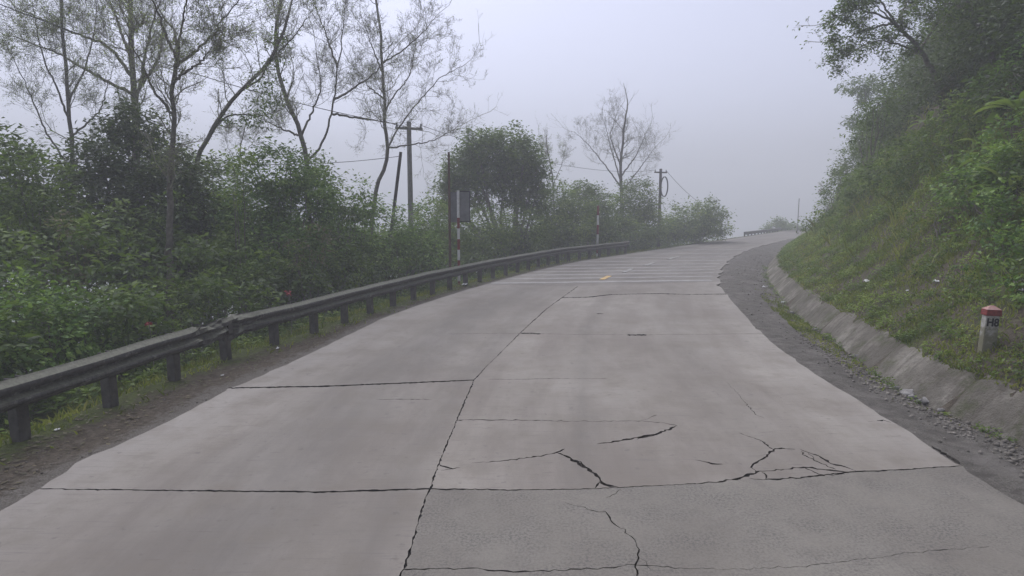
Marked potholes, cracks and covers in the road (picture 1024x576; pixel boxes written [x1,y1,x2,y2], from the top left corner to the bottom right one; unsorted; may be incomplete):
crack [404,415,989,576]
